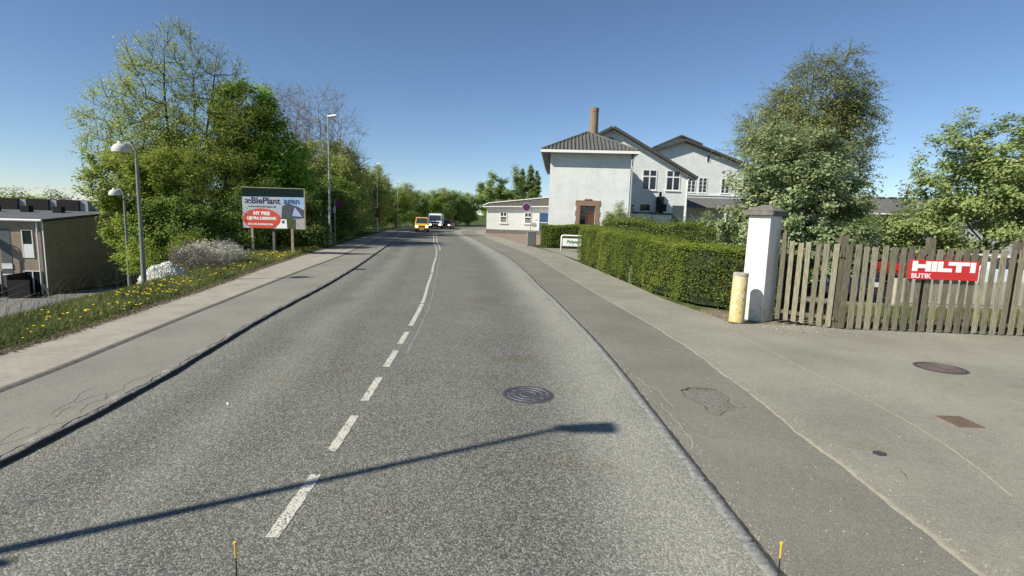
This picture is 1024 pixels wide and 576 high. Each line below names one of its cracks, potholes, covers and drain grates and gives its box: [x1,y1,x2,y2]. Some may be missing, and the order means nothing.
crack [632,376,693,449]
manhole cover [502,386,554,404]
manhole cover [912,362,970,375]
drain grate [935,415,986,428]
crack [0,370,158,445]
